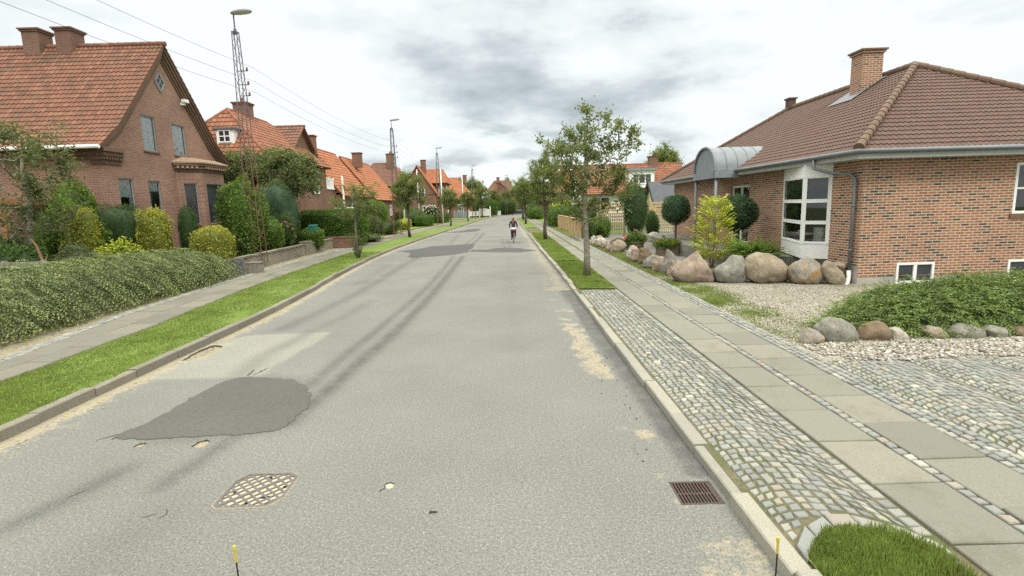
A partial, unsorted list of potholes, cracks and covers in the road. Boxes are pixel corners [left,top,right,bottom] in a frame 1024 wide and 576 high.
drain grate [669,481,725,505]
